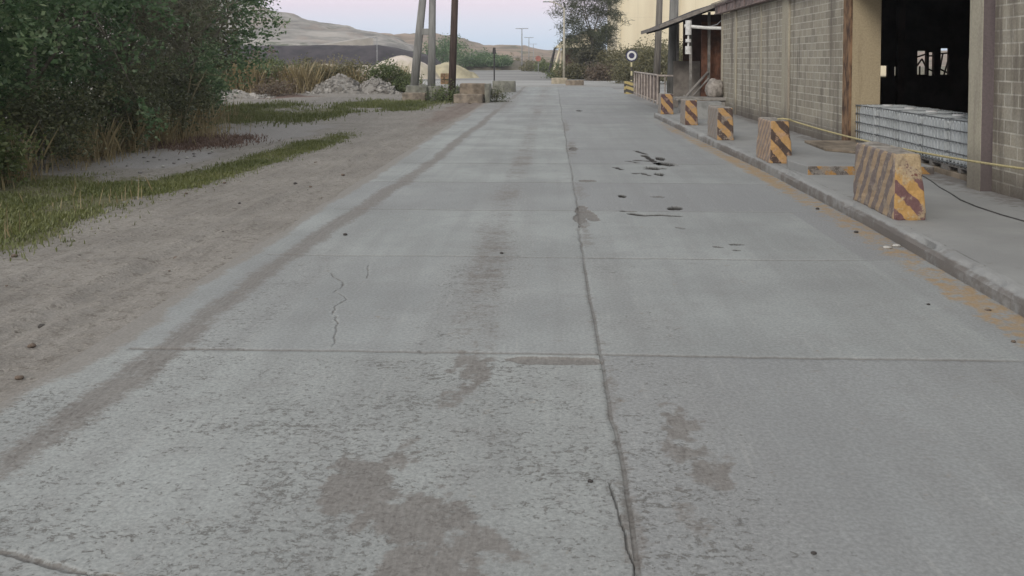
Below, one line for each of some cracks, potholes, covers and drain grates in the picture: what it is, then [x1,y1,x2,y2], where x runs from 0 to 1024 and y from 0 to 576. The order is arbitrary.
crack [604,481,640,576]
crack [328,265,372,347]
